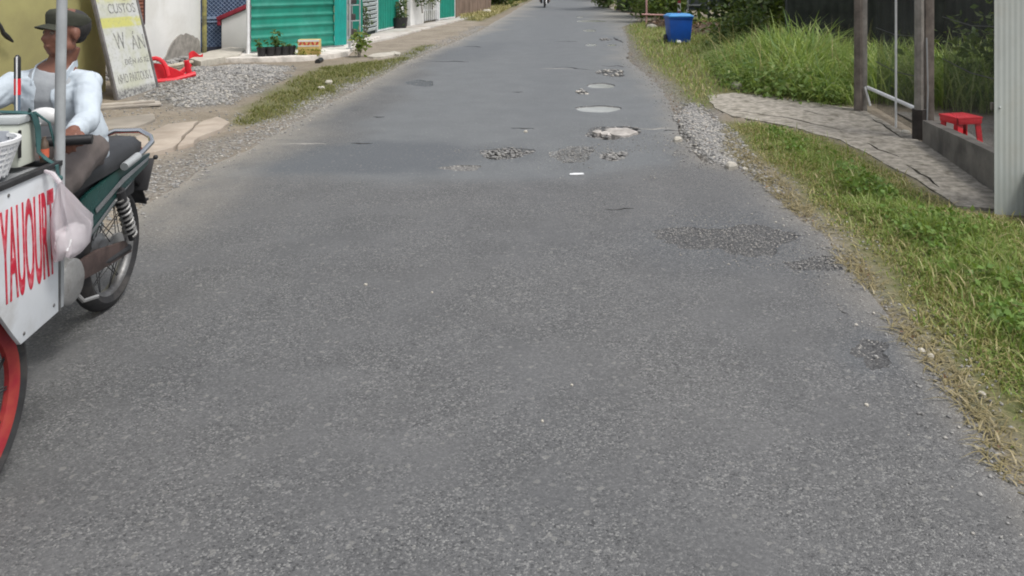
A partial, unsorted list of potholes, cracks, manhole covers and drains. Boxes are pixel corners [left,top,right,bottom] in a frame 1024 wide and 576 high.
pothole [849,338,892,370]
pothole [599,151,628,161]
pothole [479,147,536,160]
pothole [595,69,625,77]
pothole [548,146,596,163]
pothole [585,126,641,140]
